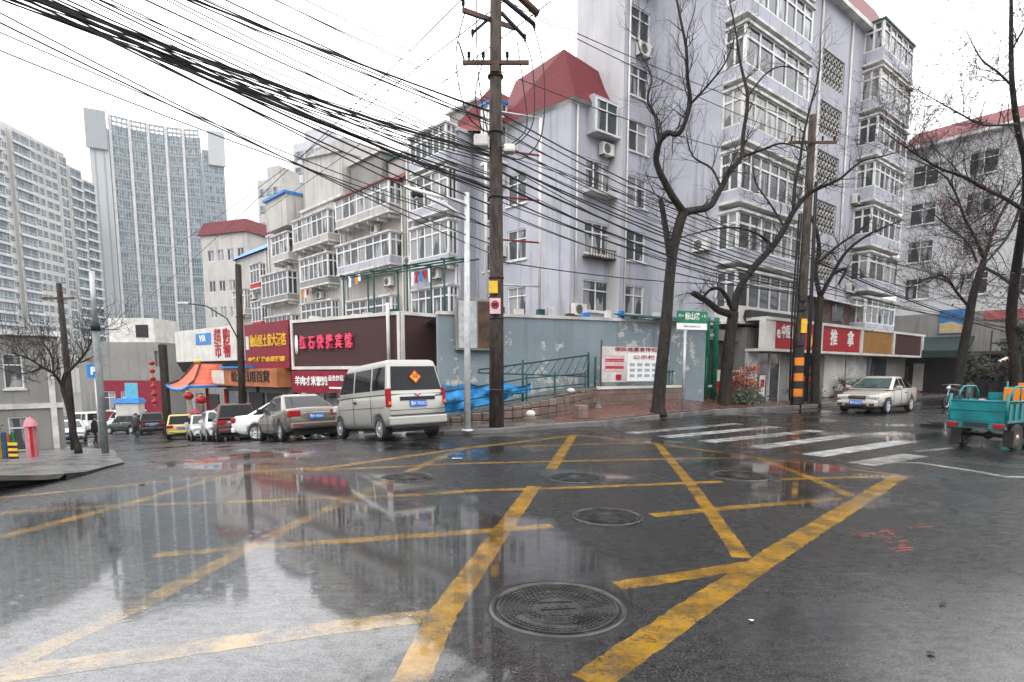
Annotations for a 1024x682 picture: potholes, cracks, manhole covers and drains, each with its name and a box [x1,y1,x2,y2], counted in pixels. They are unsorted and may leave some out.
manhole cover [545,472,606,484]
manhole cover [379,472,434,482]
manhole cover [571,507,646,527]
manhole cover [707,470,773,482]
manhole cover [483,581,635,644]
